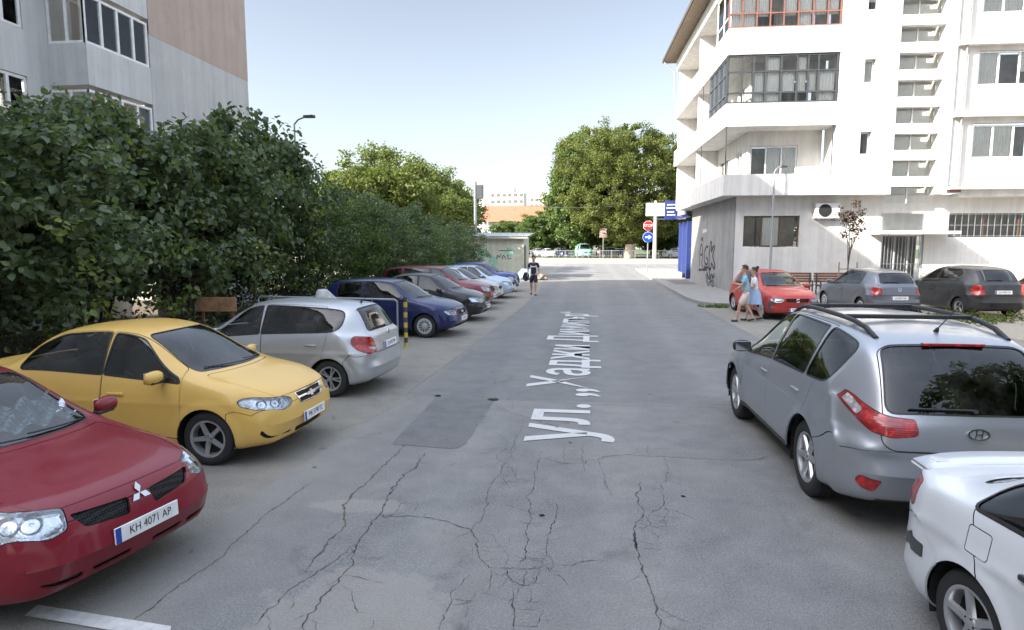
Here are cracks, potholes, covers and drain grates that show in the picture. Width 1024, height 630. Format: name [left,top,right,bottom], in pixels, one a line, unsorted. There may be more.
crack [259,404,783,630]
